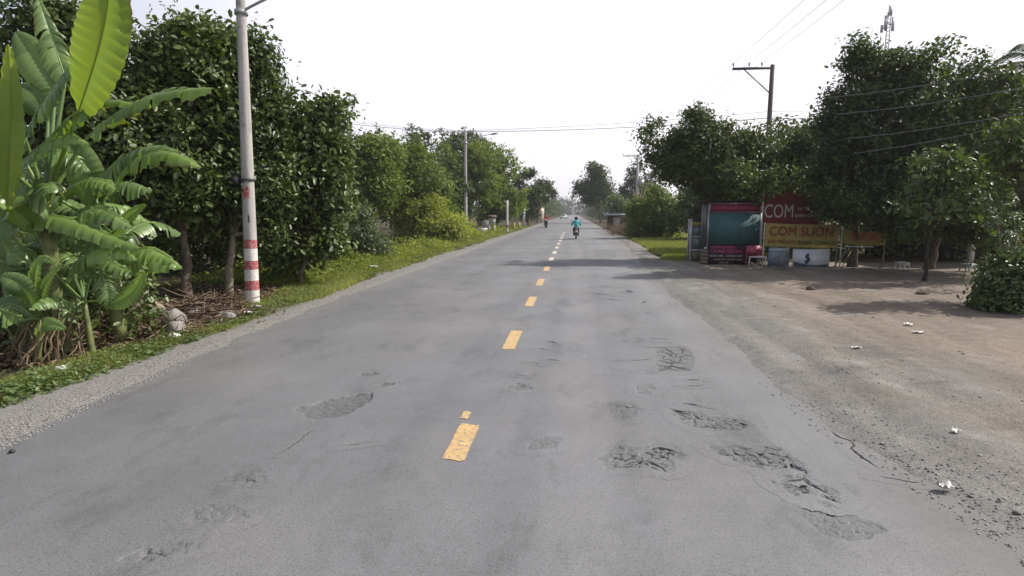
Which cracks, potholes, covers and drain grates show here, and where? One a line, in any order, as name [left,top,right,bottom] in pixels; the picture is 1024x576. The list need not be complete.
pothole [498,380,545,394]
pothole [281,389,385,424]
pothole [594,397,656,425]
crack [504,339,572,378]
pothole [656,401,769,437]
pothole [581,436,701,479]
pothole [693,439,829,487]
pothole [344,369,390,380]
pothole [646,344,705,375]
